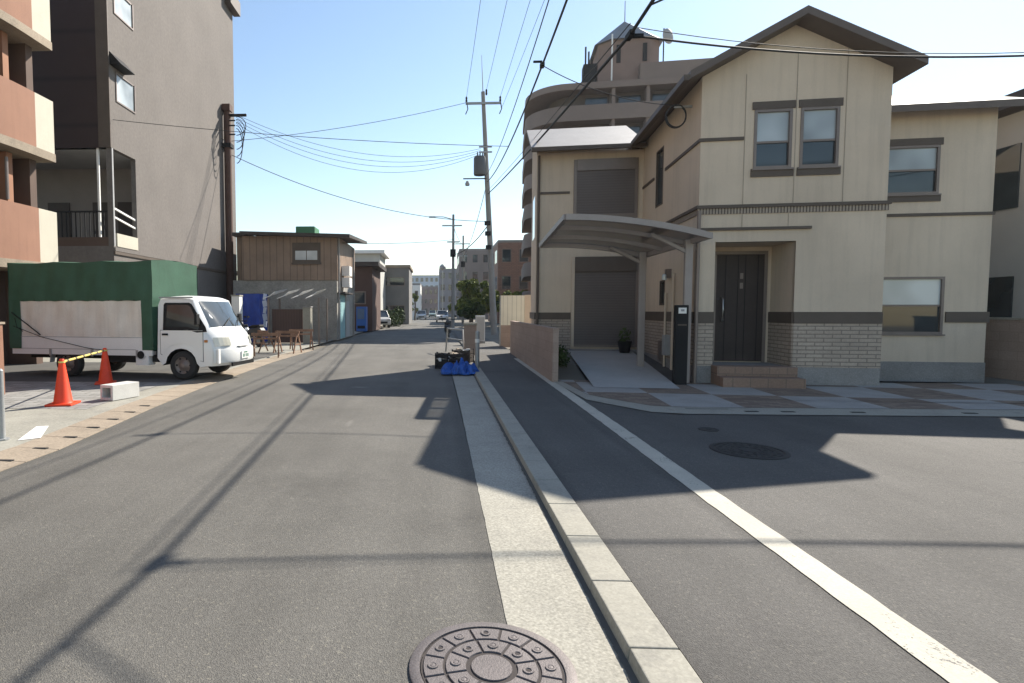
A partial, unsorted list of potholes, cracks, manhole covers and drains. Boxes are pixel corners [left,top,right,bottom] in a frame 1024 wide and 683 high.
manhole cover [709,442,791,460]
manhole cover [409,622,578,683]
